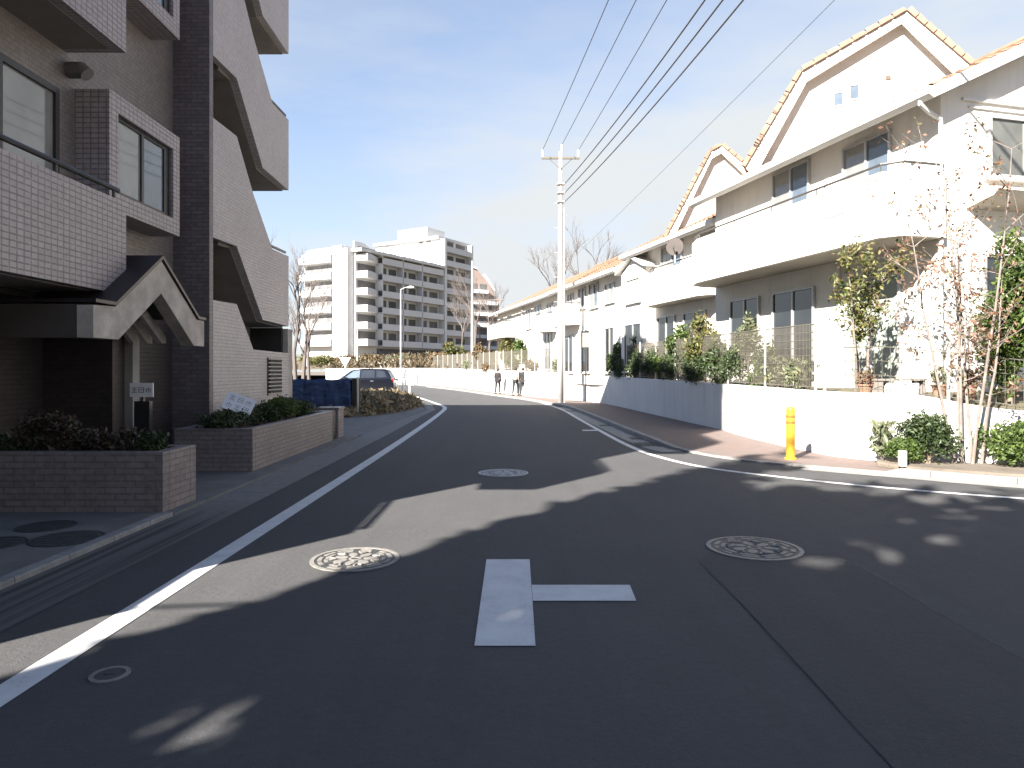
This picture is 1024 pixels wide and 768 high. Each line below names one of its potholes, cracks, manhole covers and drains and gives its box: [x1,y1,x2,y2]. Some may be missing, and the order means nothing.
manhole cover [13,520,78,533]
manhole cover [706,536,804,561]
manhole cover [0,536,28,549]
utility cover [88,666,131,683]
manhole cover [309,547,400,572]
manhole cover [26,530,105,547]
manhole cover [478,469,528,477]
